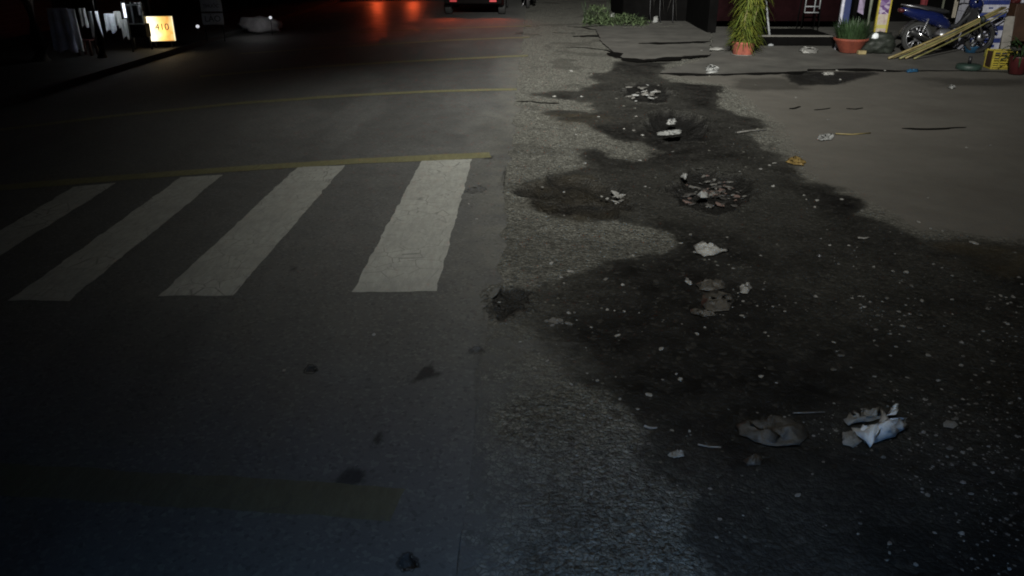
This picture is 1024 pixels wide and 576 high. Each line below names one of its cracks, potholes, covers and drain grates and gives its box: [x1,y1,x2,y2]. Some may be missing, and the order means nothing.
pothole [656,166,769,218]
pothole [479,282,542,326]
crack [552,25,903,76]
pothole [614,80,679,105]
pothole [633,107,720,144]
